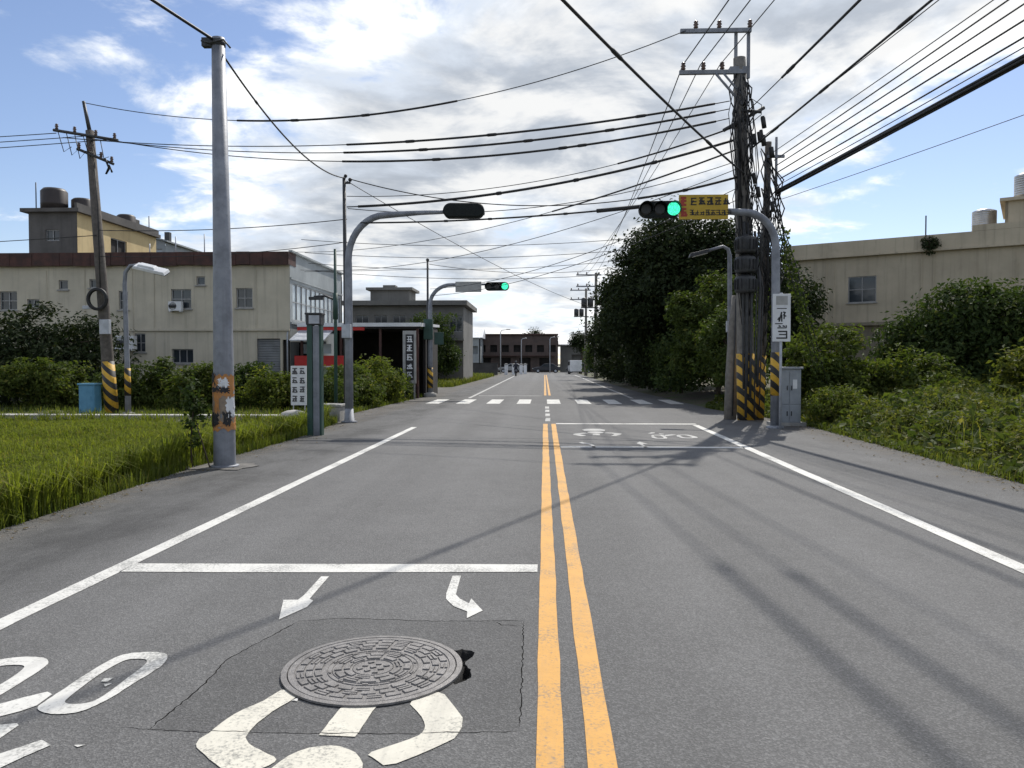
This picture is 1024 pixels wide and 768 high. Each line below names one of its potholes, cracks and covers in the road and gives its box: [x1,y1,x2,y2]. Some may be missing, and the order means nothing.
manhole cover [280,636,463,708]
pothole [454,649,475,682]
